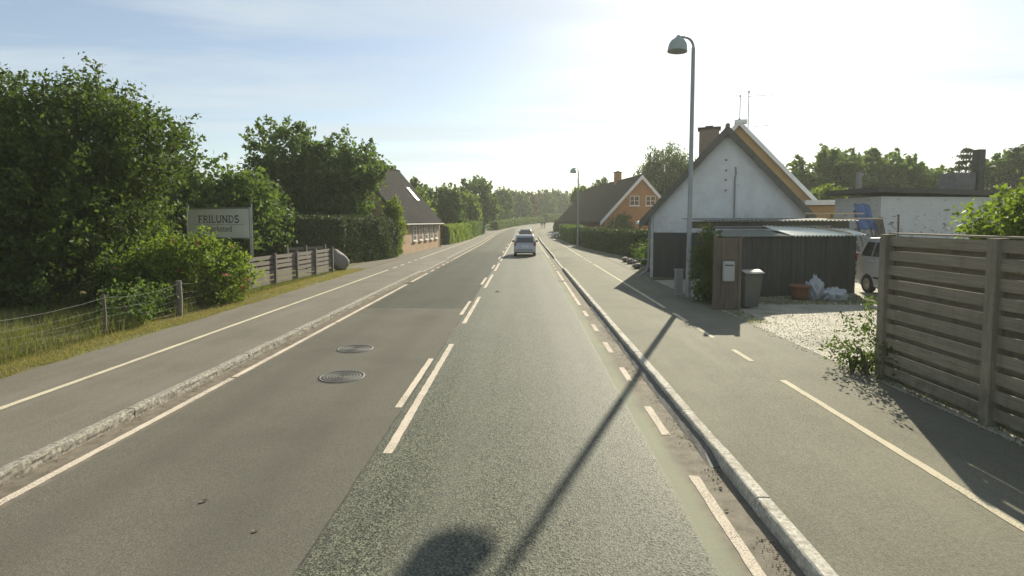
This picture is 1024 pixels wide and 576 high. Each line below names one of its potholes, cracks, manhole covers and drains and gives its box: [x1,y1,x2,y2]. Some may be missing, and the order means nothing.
manhole cover [335,345,374,353]
manhole cover [317,370,367,384]
